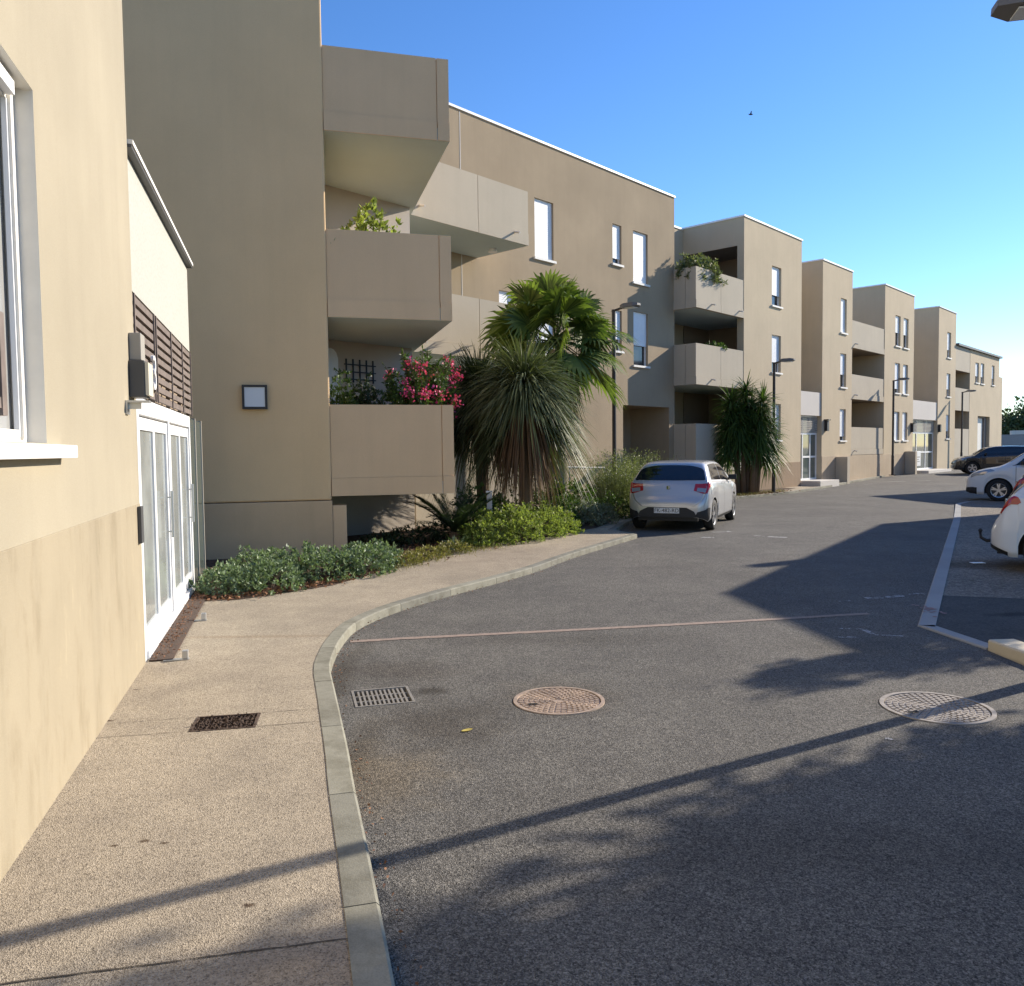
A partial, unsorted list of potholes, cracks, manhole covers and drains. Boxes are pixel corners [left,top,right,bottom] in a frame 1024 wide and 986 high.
drain grate [189,712,261,732]
manhole cover [513,687,605,715]
manhole cover [879,691,998,725]
drain grate [351,686,416,708]
